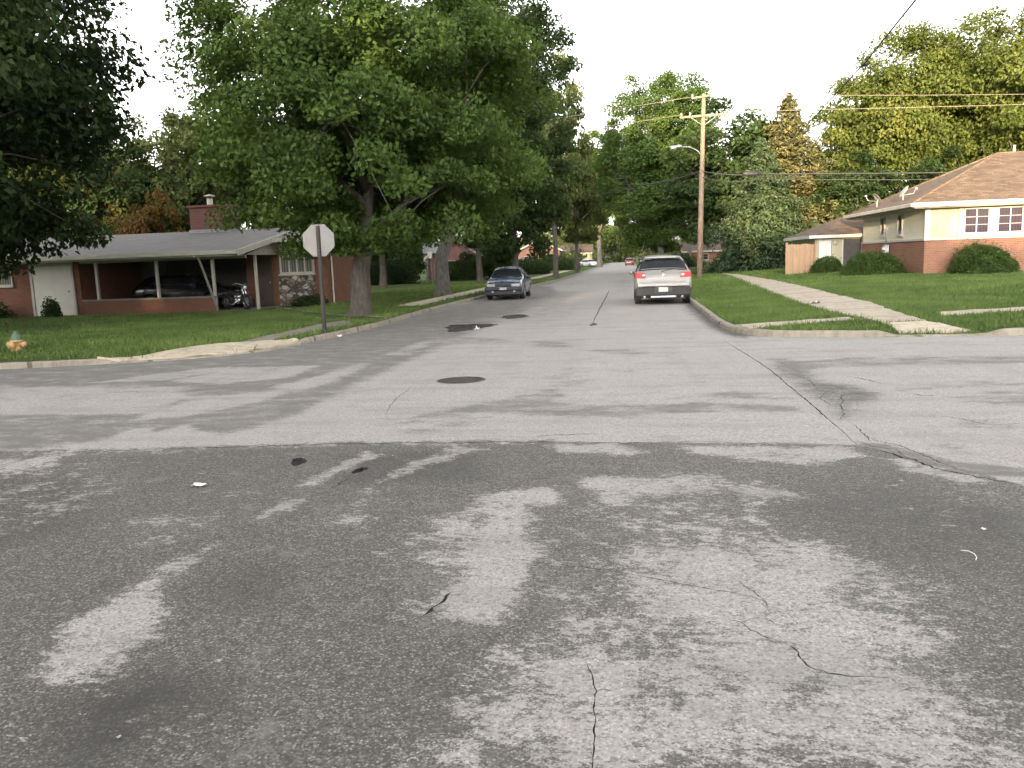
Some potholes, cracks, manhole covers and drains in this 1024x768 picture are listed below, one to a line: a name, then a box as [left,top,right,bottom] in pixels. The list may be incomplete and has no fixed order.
crack [488,555,887,678]
crack [586,661,609,768]
pothole [443,324,498,332]
manhole cover [436,376,486,384]
crack [419,593,450,618]
crack [782,363,1022,485]
